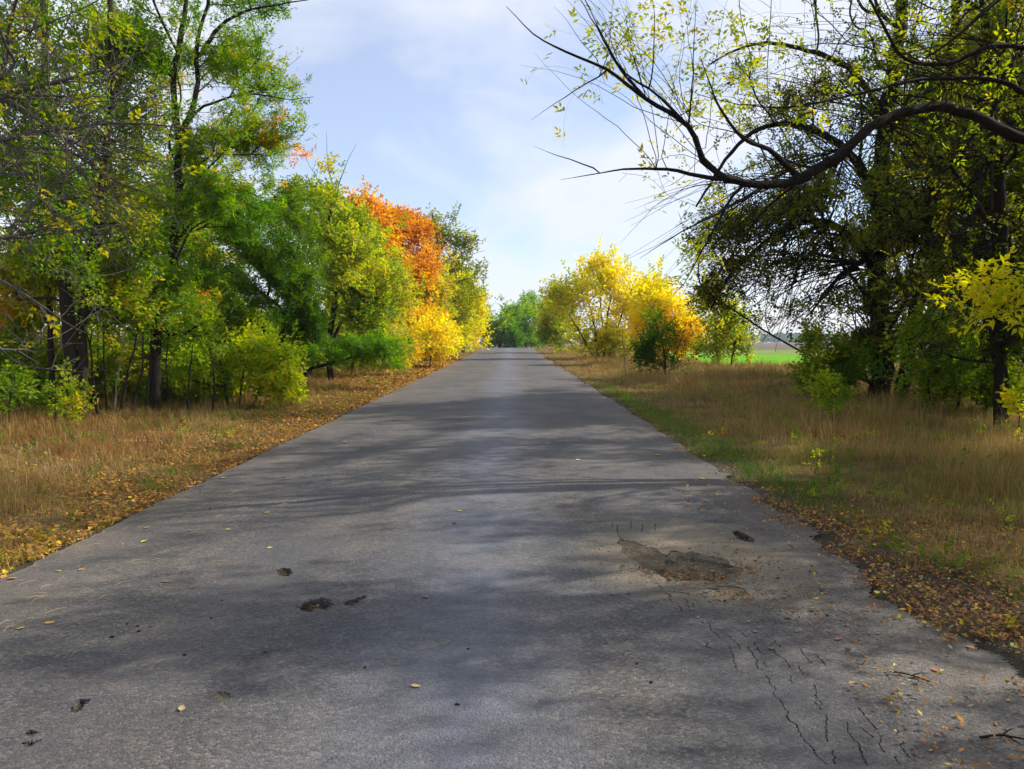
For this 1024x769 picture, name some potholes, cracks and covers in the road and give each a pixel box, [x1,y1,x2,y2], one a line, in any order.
pothole [67,699,91,713]
crack [611,521,916,765]
pothole [343,595,368,606]
pothole [617,539,744,584]
pothole [295,597,335,612]
pothole [276,567,293,576]
